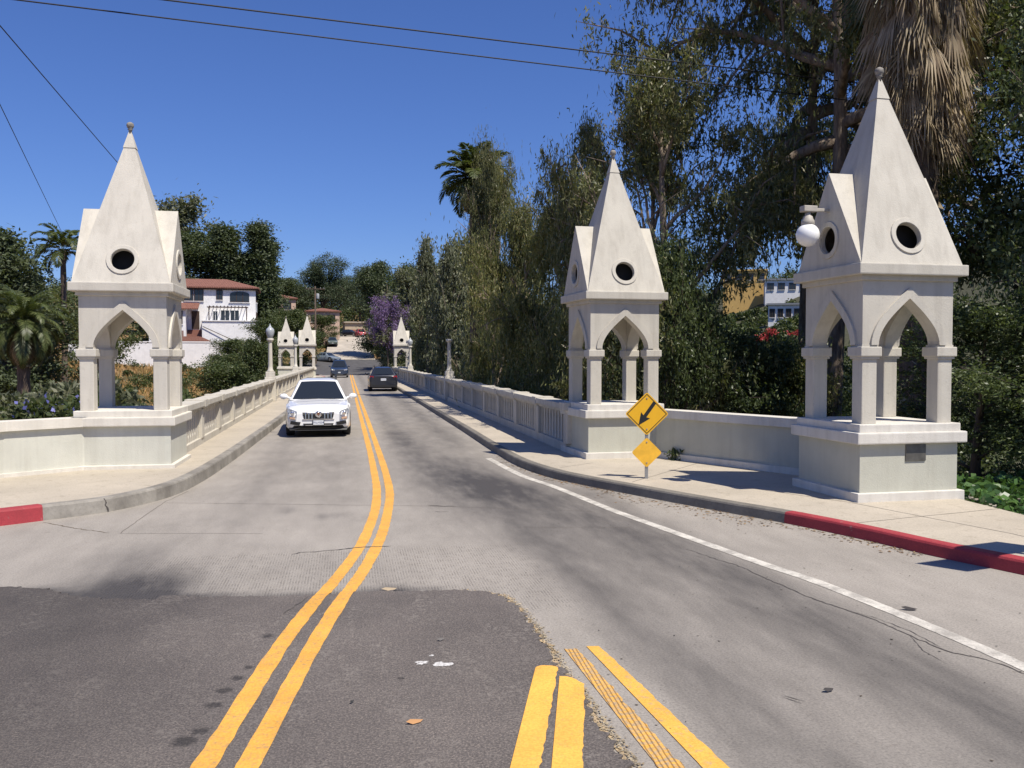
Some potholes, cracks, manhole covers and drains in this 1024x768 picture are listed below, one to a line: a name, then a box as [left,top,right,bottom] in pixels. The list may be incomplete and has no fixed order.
crack [691,550,1024,674]
